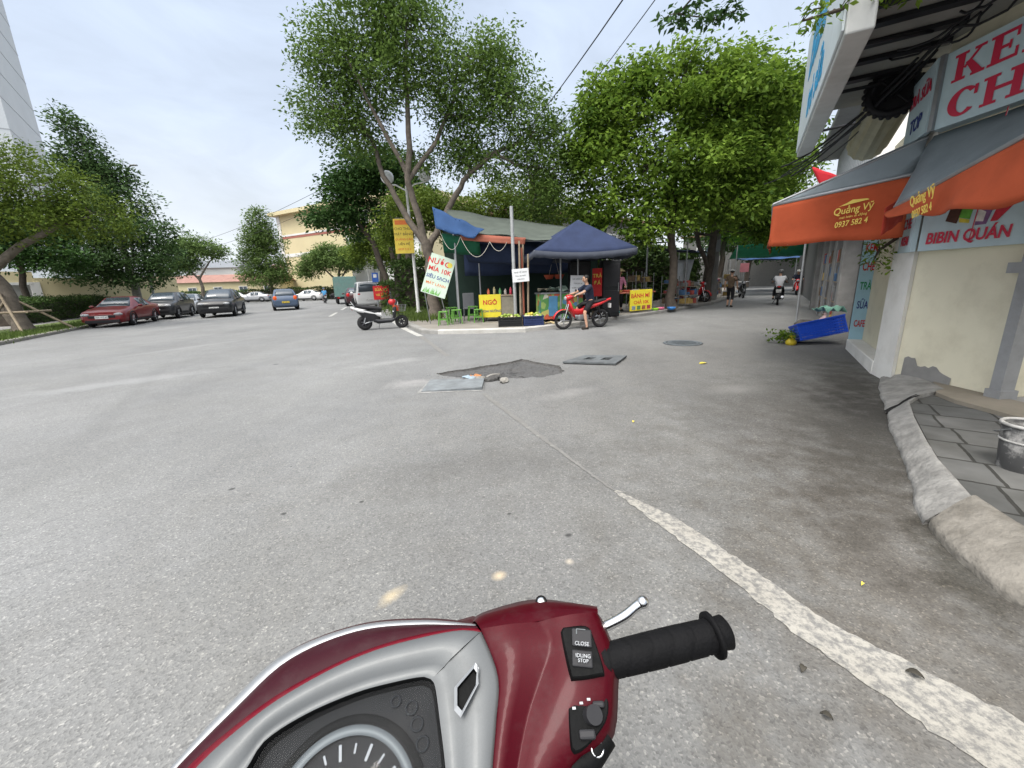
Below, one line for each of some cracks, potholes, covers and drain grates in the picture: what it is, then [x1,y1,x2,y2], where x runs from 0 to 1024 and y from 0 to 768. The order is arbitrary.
pothole [438,359,564,381]
manhole cover [563,355,627,365]
crack [884,394,920,412]
